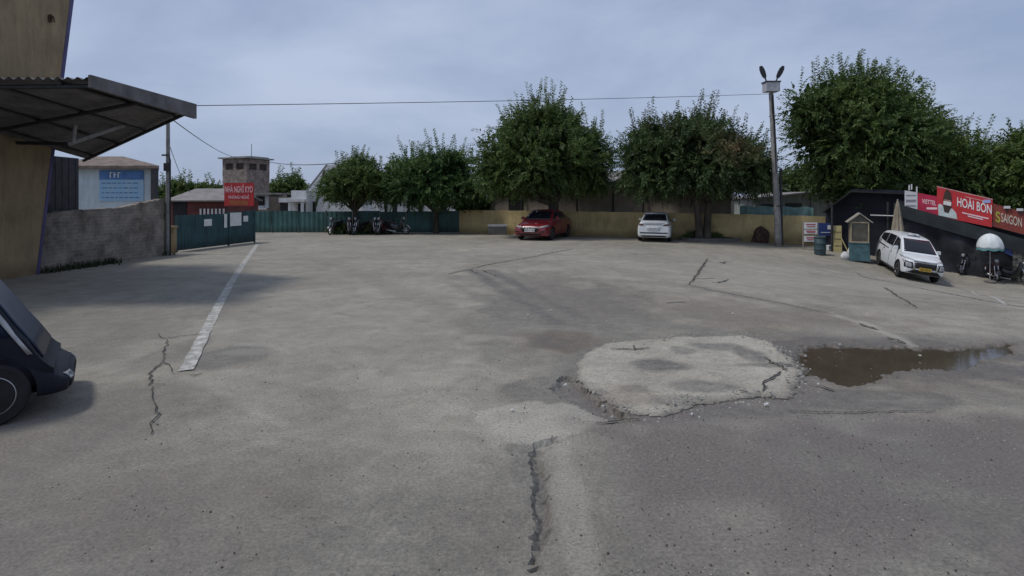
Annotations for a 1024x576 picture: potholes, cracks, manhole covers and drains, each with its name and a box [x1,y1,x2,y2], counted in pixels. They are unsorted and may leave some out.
pothole [794,343,1022,387]
crack [688,259,729,285]
crack [762,357,792,390]
crack [148,332,210,434]
crack [857,273,1023,308]
pothole [548,376,634,424]
crack [450,249,569,276]
